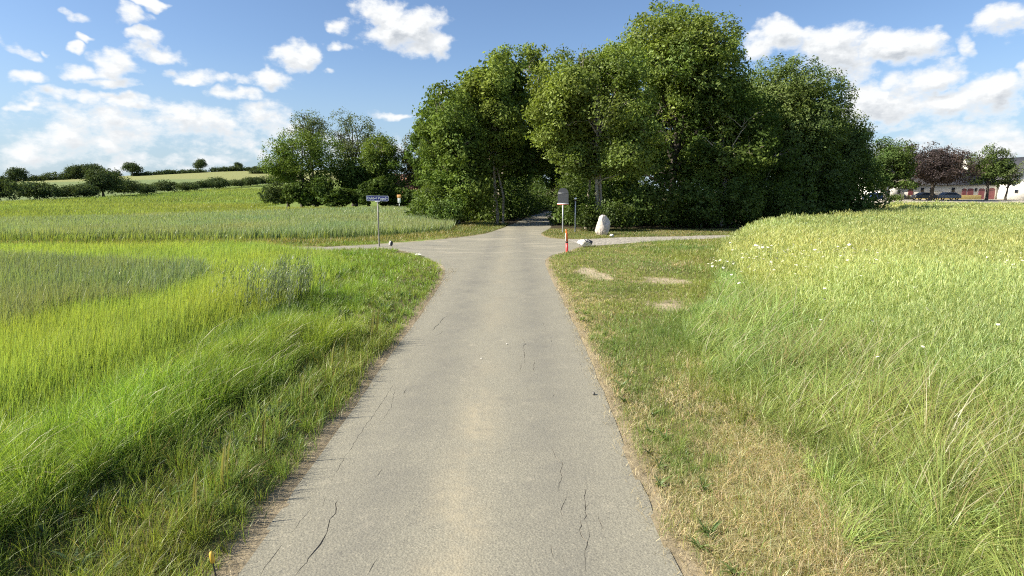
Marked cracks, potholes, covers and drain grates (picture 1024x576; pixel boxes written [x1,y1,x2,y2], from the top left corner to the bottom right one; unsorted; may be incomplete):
crack [552,449,604,571]
crack [261,500,337,574]
crack [333,387,405,477]
